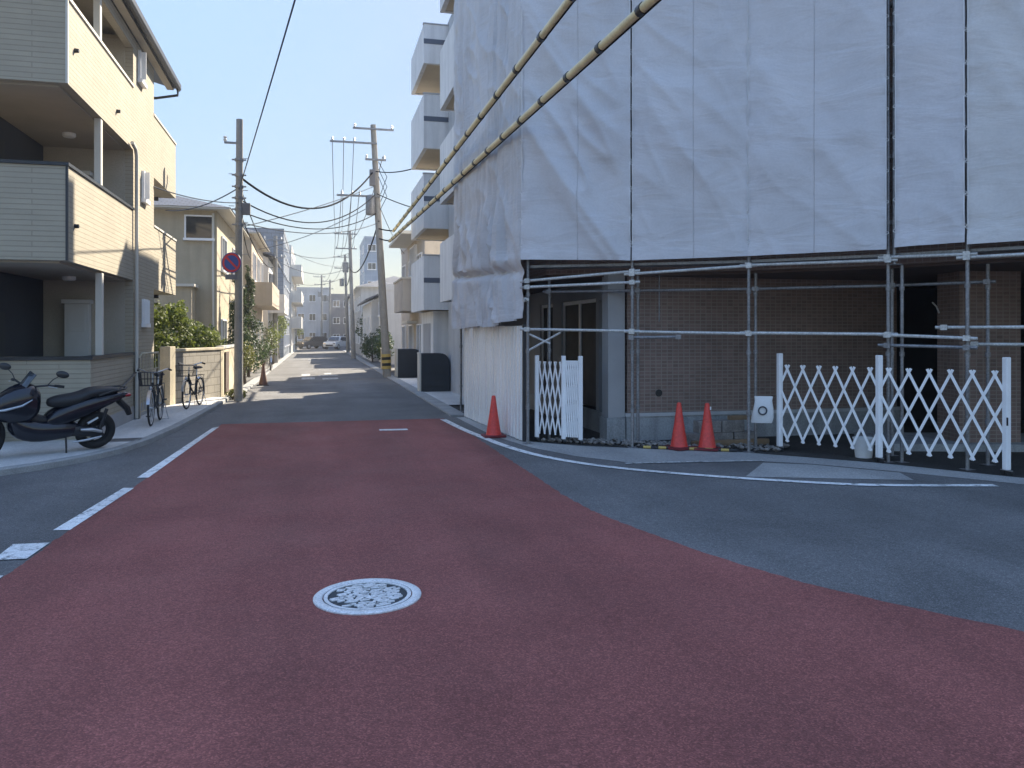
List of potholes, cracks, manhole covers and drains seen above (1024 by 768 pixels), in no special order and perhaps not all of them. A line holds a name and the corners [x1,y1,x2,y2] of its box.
manhole cover [313,578,421,615]
